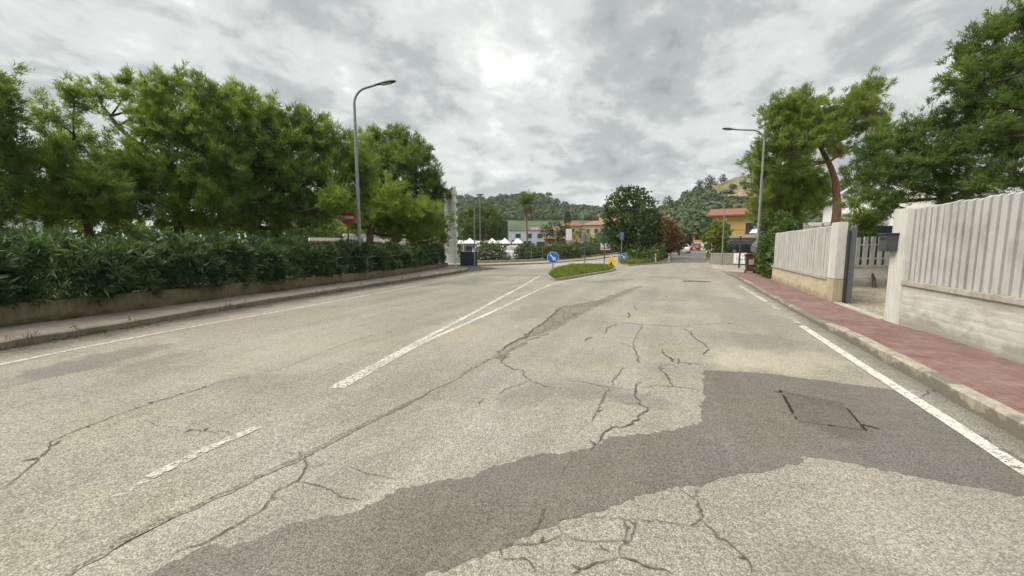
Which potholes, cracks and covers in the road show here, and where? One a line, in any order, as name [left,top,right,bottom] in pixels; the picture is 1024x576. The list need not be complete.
crack [171,450,396,554]
crack [563,306,731,449]
manhole cover [774,390,879,431]
crack [478,306,575,405]
crack [8,318,420,485]
crack [499,452,688,574]
